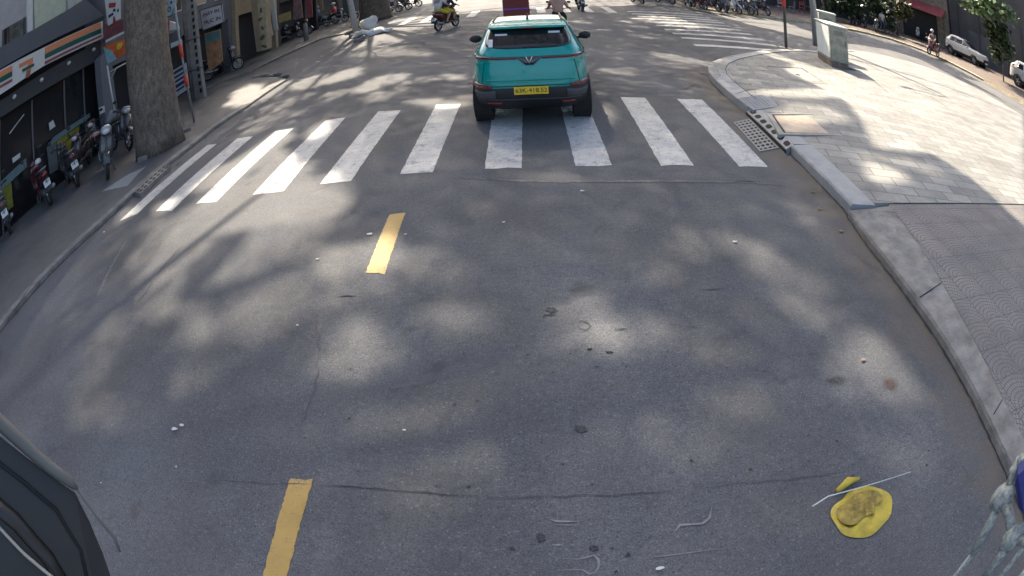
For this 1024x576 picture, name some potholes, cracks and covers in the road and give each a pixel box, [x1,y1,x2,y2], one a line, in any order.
manhole cover [766,113,842,138]
drain grate [734,110,809,154]
crack [295,329,320,443]
crack [319,485,470,496]
